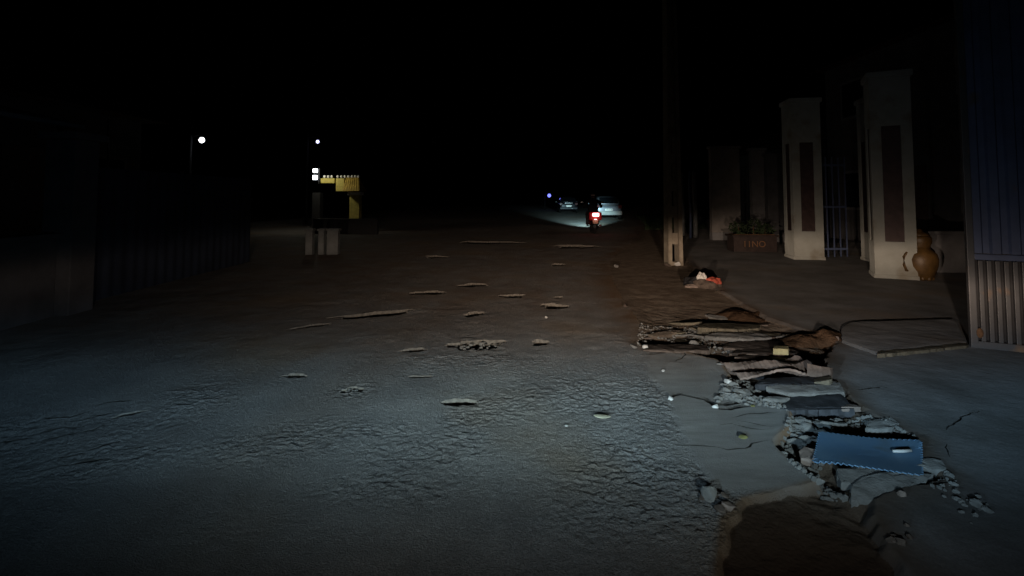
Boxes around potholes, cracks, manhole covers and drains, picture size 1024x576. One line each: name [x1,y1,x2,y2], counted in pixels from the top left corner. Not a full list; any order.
crack [945,410,985,457]
crack [672,393,777,450]
pothole [444,339,507,351]
